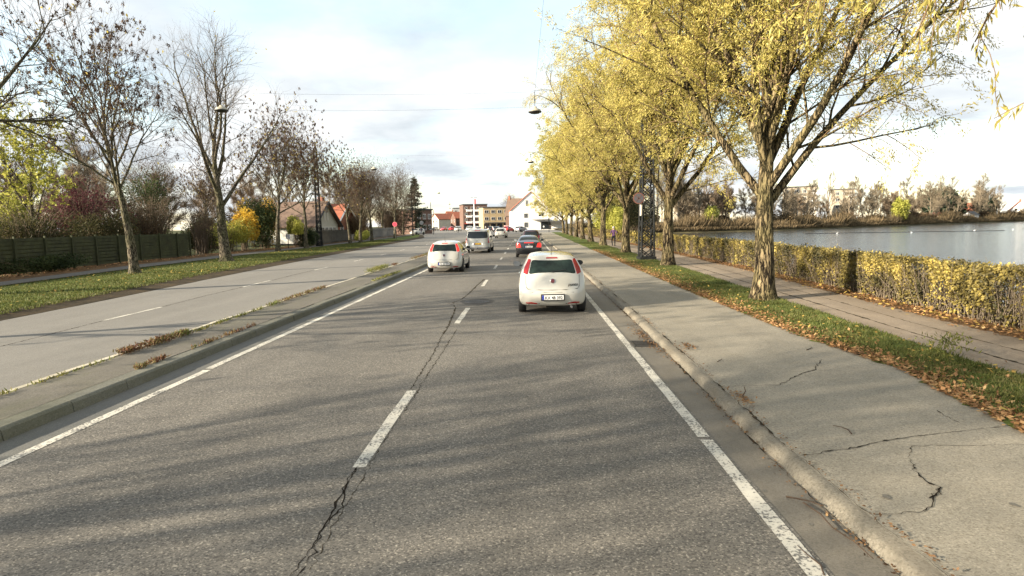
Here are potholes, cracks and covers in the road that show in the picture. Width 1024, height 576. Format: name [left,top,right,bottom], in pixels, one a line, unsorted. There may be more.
crack [803,410,1024,514]
crack [290,467,357,576]
